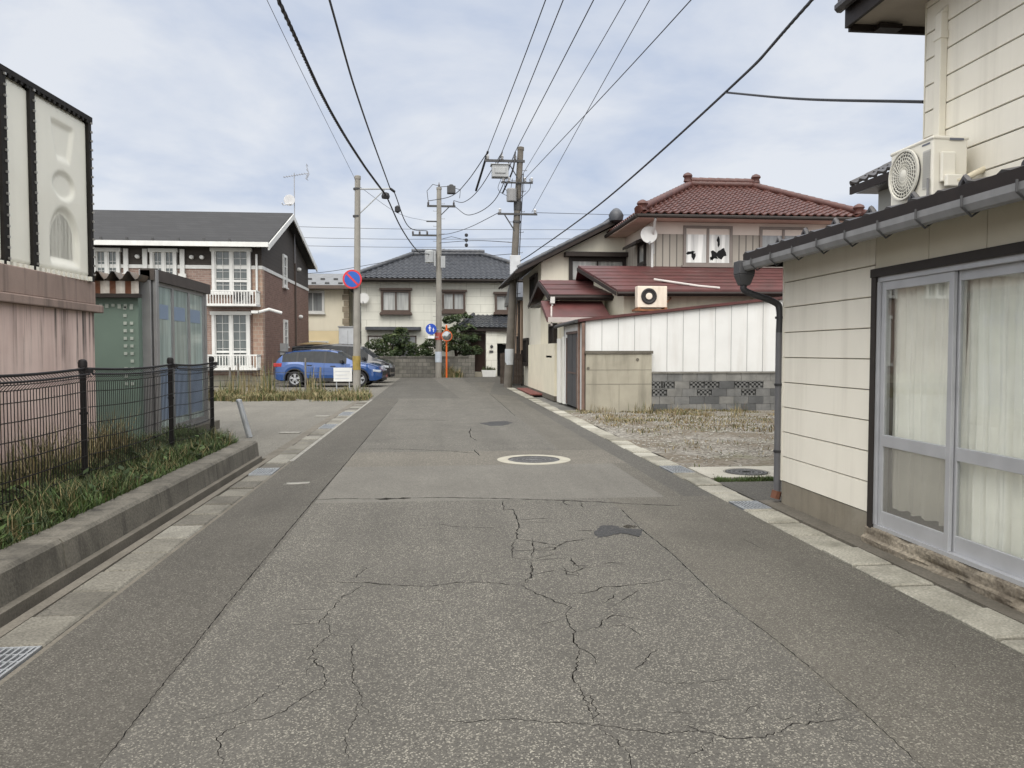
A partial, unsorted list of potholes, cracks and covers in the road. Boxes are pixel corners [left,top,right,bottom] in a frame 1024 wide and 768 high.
crack [177,568,369,766]
manhole cover [723,468,770,476]
drain grate [659,465,694,474]
drain grate [729,501,772,510]
manhole cover [497,455,571,465]
drain grate [248,468,280,476]
drain grate [0,646,42,680]
crack [341,503,856,768]
